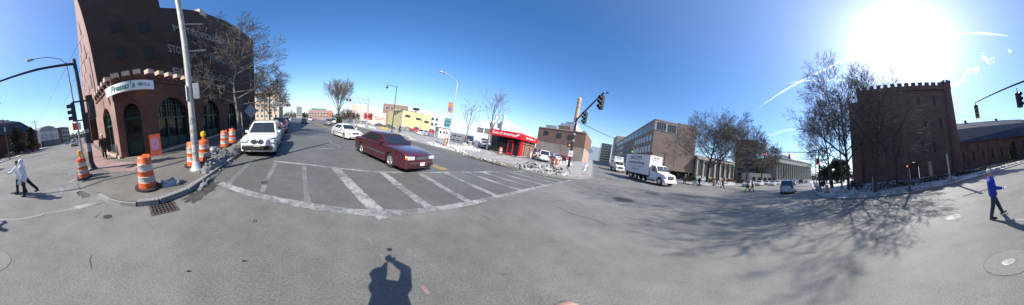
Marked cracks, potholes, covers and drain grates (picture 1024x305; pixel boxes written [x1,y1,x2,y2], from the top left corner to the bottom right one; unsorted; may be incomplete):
drain grate [149,200,180,216]
